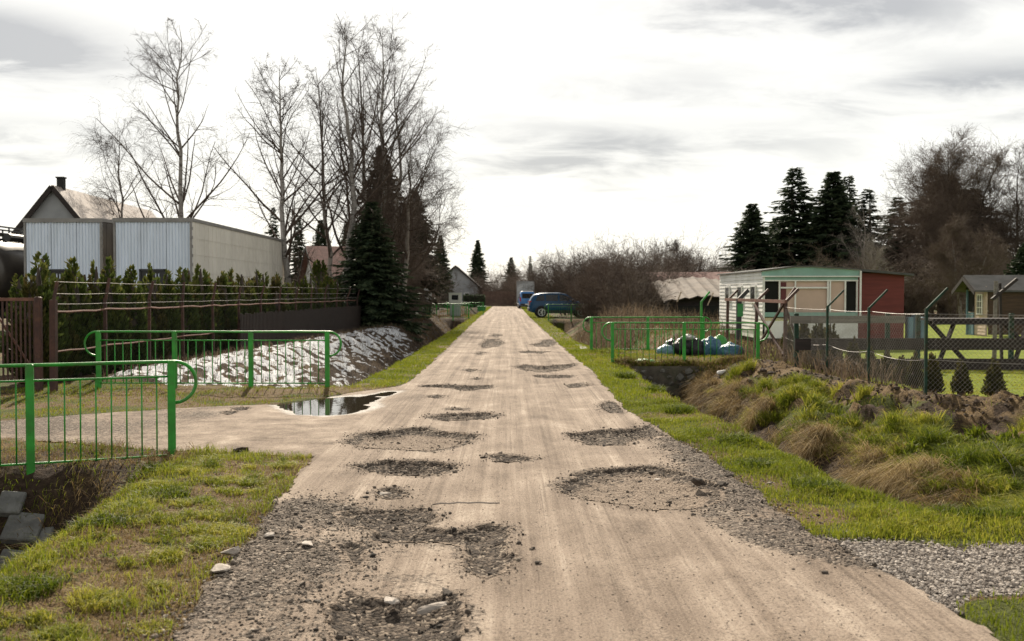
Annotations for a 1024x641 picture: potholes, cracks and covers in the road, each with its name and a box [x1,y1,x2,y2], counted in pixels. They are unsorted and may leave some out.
pothole [479,451,543,464]
pothole [594,401,626,413]
pothole [561,423,673,446]
pothole [419,411,505,422]
pothole [290,586,484,641]
pothole [336,425,487,453]
pothole [479,339,504,348]
pothole [339,457,470,478]
pothole [513,363,578,373]
pothole [326,505,536,583]
pothole [363,485,420,500]
pothole [527,339,557,347]
